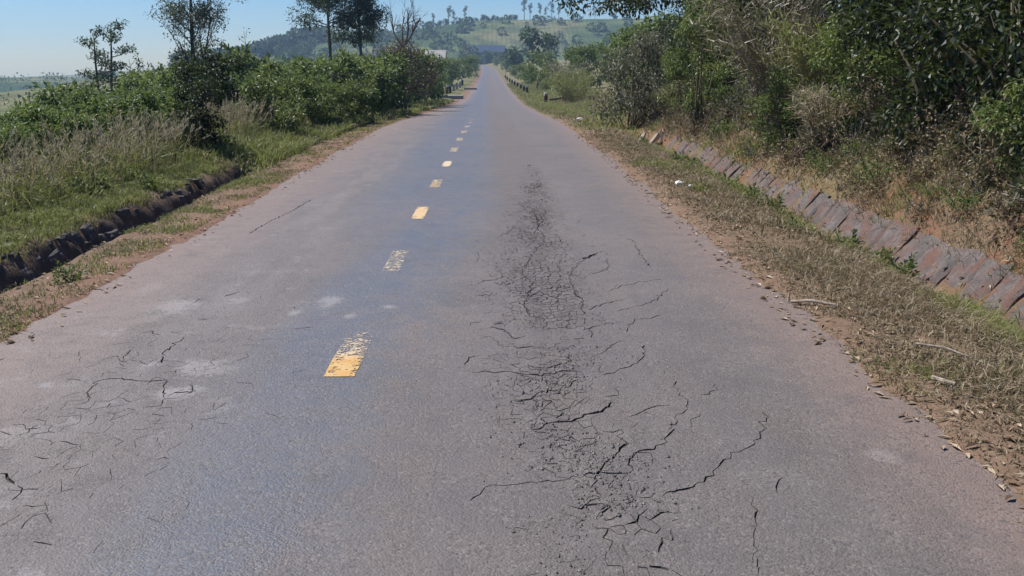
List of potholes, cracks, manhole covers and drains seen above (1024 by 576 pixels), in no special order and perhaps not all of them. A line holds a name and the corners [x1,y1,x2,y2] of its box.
crack [459,167,769,576]
crack [2,292,311,552]
